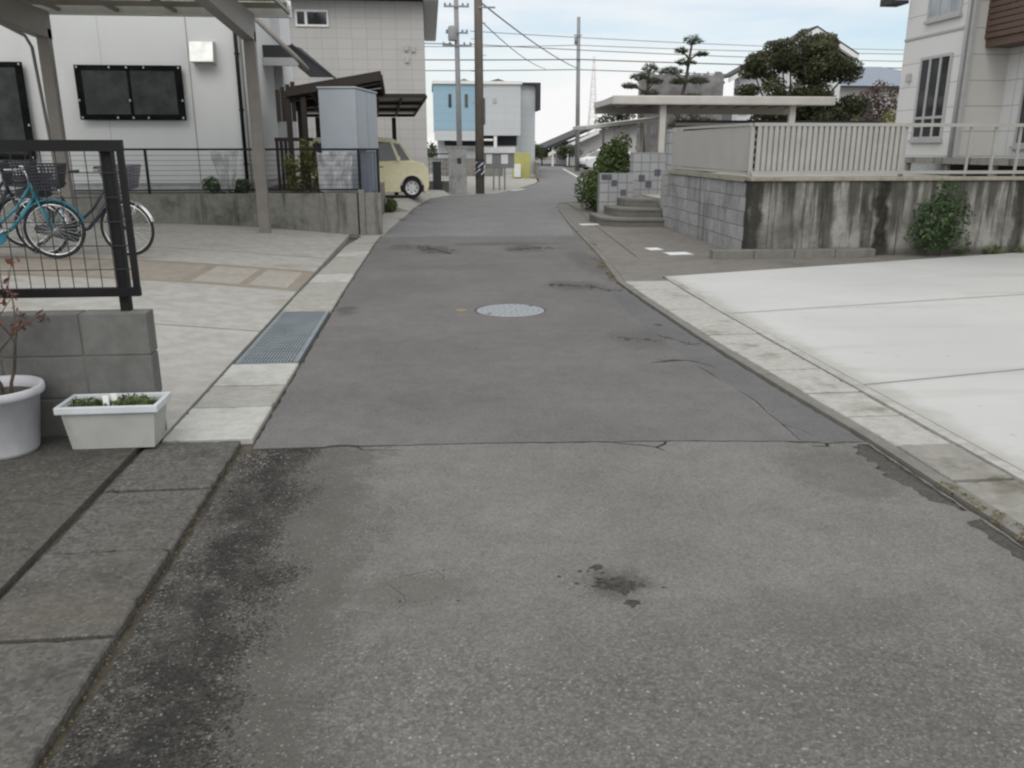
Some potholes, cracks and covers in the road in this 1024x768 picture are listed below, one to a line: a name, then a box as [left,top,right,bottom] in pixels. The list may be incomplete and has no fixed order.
crack [362,568,511,613]
crack [253,334,858,451]
drain grate [235,310,330,365]
crack [548,283,623,292]
manhole cover [474,304,547,317]
